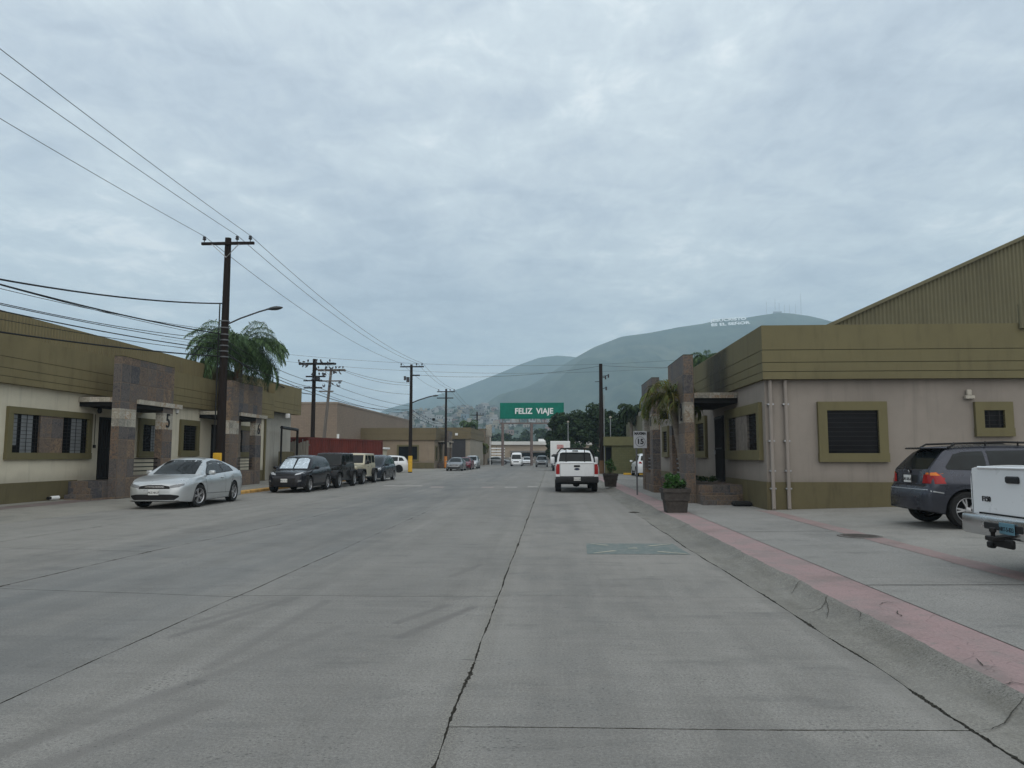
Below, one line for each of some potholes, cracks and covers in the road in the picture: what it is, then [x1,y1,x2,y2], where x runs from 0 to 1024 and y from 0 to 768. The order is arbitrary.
crack [431,474,1024,768]
